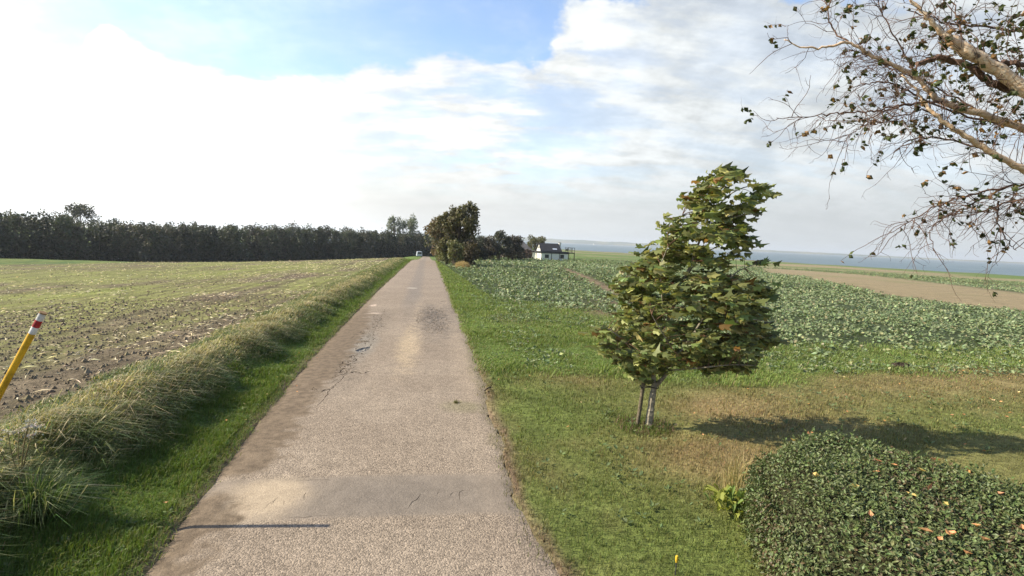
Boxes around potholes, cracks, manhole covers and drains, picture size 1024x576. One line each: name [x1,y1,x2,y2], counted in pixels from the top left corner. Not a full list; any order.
crack [312,309,388,409]
